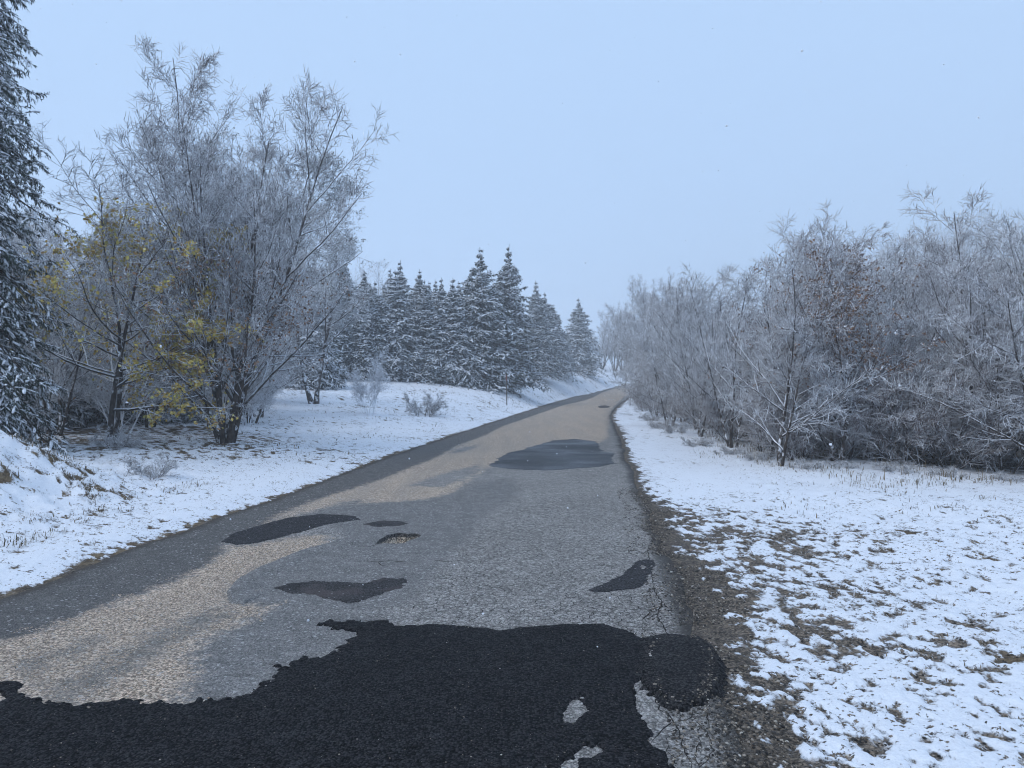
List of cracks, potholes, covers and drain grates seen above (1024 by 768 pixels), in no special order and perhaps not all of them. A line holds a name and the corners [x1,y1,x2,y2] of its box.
crack [413,494,668,636]
crack [643,702,715,768]
pothole [376,533,421,544]
